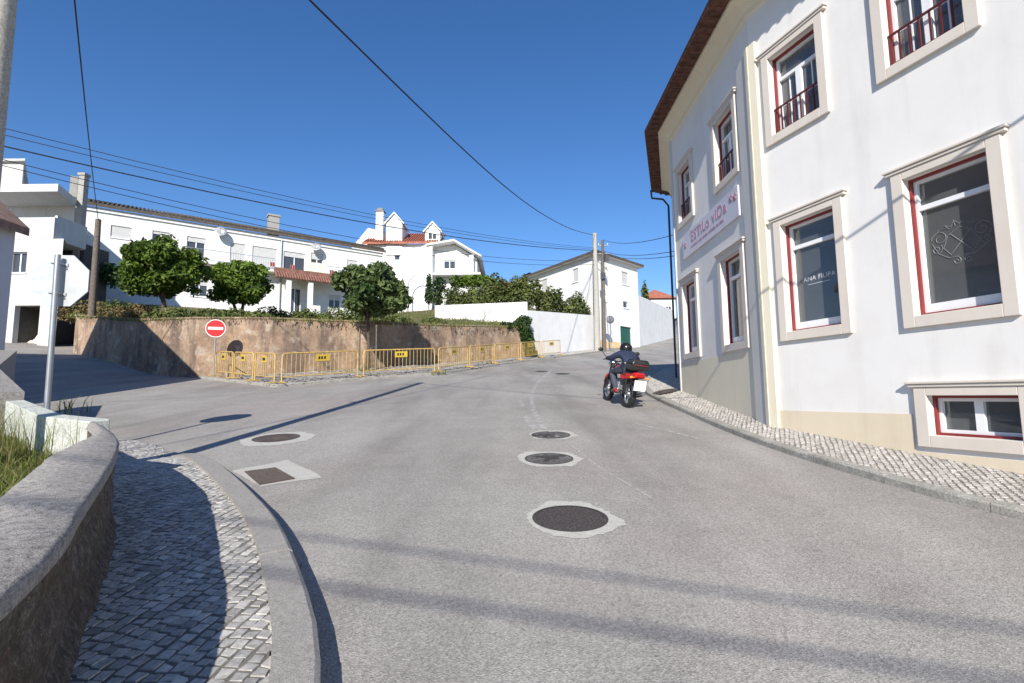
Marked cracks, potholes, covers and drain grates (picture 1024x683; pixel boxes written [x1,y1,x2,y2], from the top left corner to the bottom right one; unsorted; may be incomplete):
manhole cover [240,432,316,446]
manhole cover [517,451,583,467]
manhole cover [526,500,626,538]
manhole cover [529,430,579,439]
